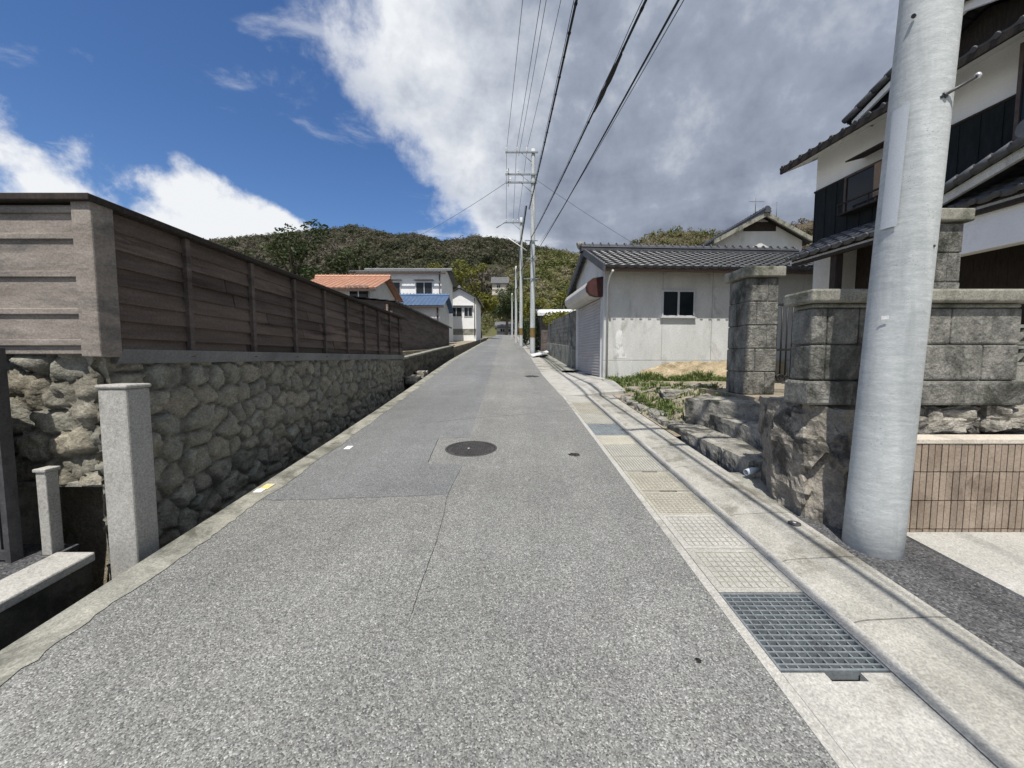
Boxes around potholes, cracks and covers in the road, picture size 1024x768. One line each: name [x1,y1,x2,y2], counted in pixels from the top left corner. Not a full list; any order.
drain grate [719,593,890,680]
manhole cover [445,441,497,457]
crack [279,469,461,628]
